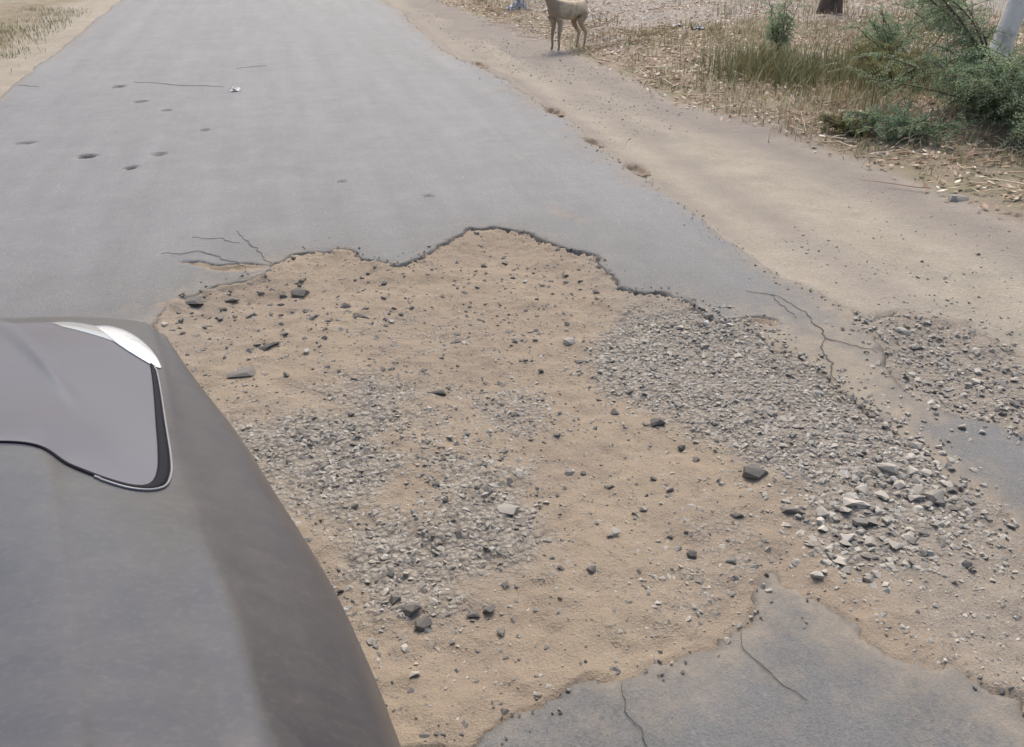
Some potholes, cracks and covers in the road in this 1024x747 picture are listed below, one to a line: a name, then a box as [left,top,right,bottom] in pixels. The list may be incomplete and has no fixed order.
crack [161,231,272,273]
pothole [590,294,1024,712]
pothole [154,229,773,747]
crack [748,291,877,378]
crack [741,632,807,701]
